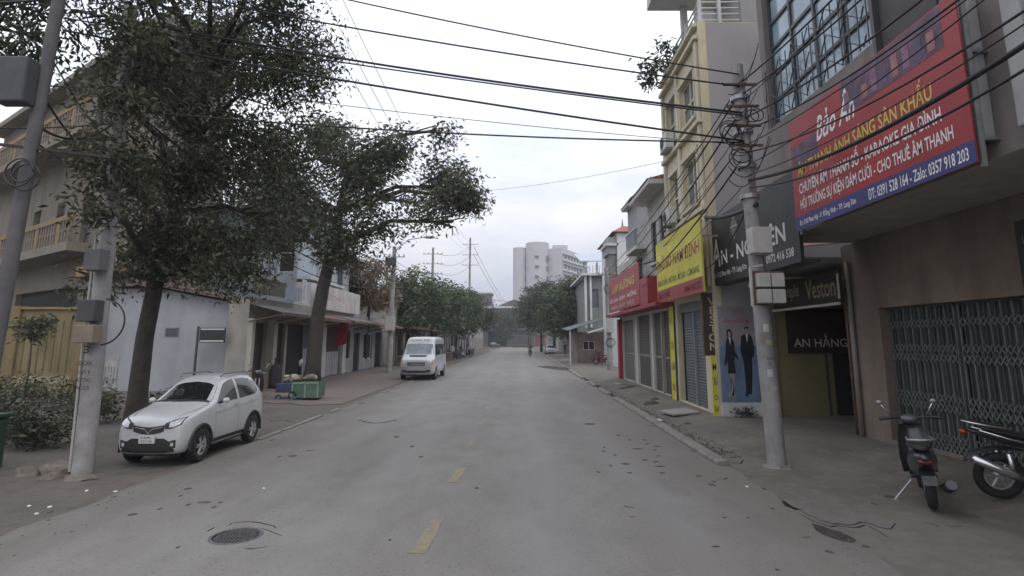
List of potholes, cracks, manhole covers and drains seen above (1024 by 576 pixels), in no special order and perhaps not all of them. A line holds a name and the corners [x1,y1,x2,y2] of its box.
crack [800,514,889,538]
manhole cover [208,527,264,545]
pothole [811,523,856,543]
crack [206,521,282,549]
